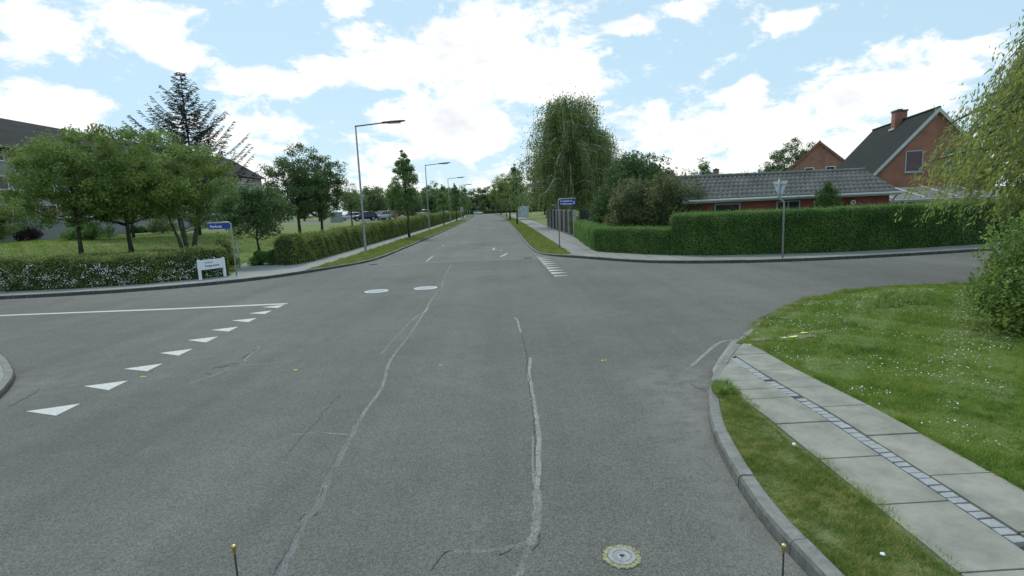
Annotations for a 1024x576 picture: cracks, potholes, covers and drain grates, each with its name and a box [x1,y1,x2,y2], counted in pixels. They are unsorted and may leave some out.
manhole cover [602,545,642,569]
crack [188,341,292,384]
